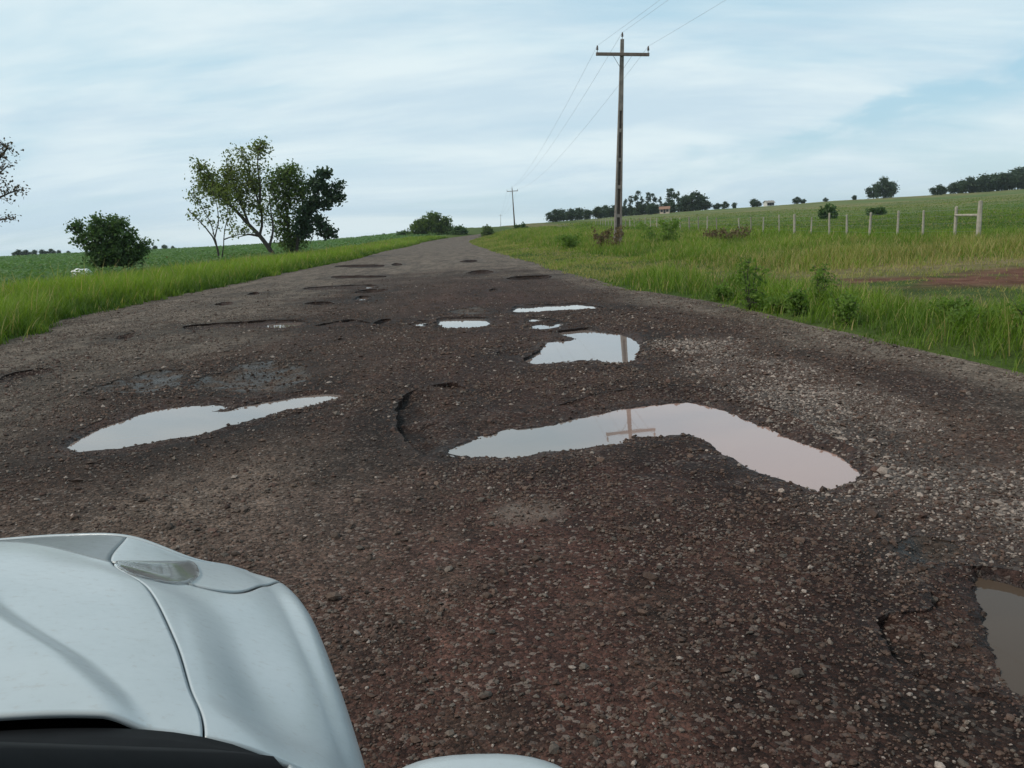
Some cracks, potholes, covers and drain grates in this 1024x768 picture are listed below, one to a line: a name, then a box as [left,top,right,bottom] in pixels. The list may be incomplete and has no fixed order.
pothole [433,317,496,332]
pothole [509,303,603,315]
pothole [496,326,646,370]
pothole [188,361,313,393]
pothole [58,389,356,456]
pothole [88,370,189,393]
pothole [877,565,1024,705]
pothole [523,317,565,329]
pothole [183,319,309,330]
